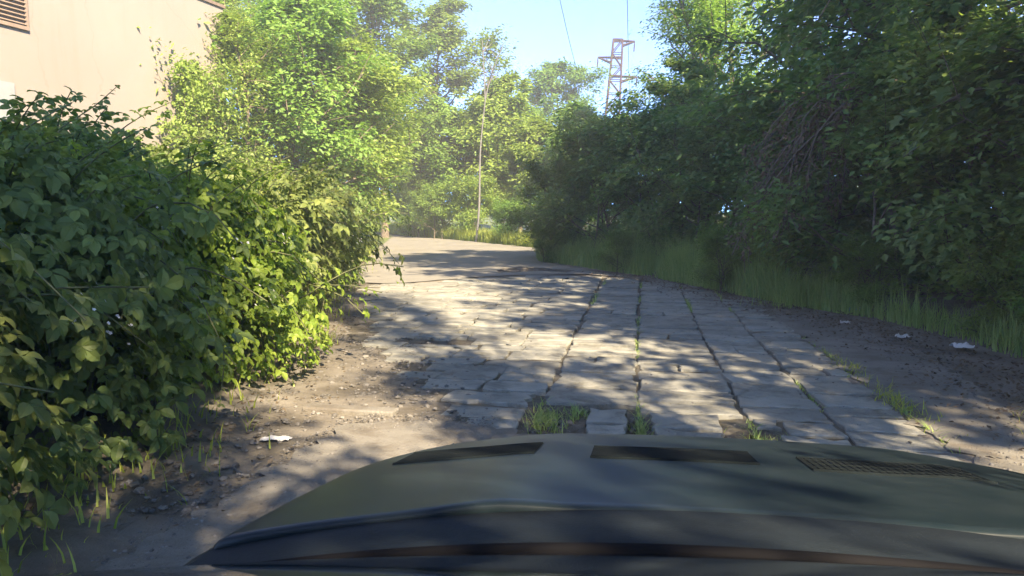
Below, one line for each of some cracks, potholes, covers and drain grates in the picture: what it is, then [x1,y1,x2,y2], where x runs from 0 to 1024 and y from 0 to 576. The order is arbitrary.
pothole [629,417,655,435]
pothole [518,405,588,434]
pothole [726,429,783,441]
